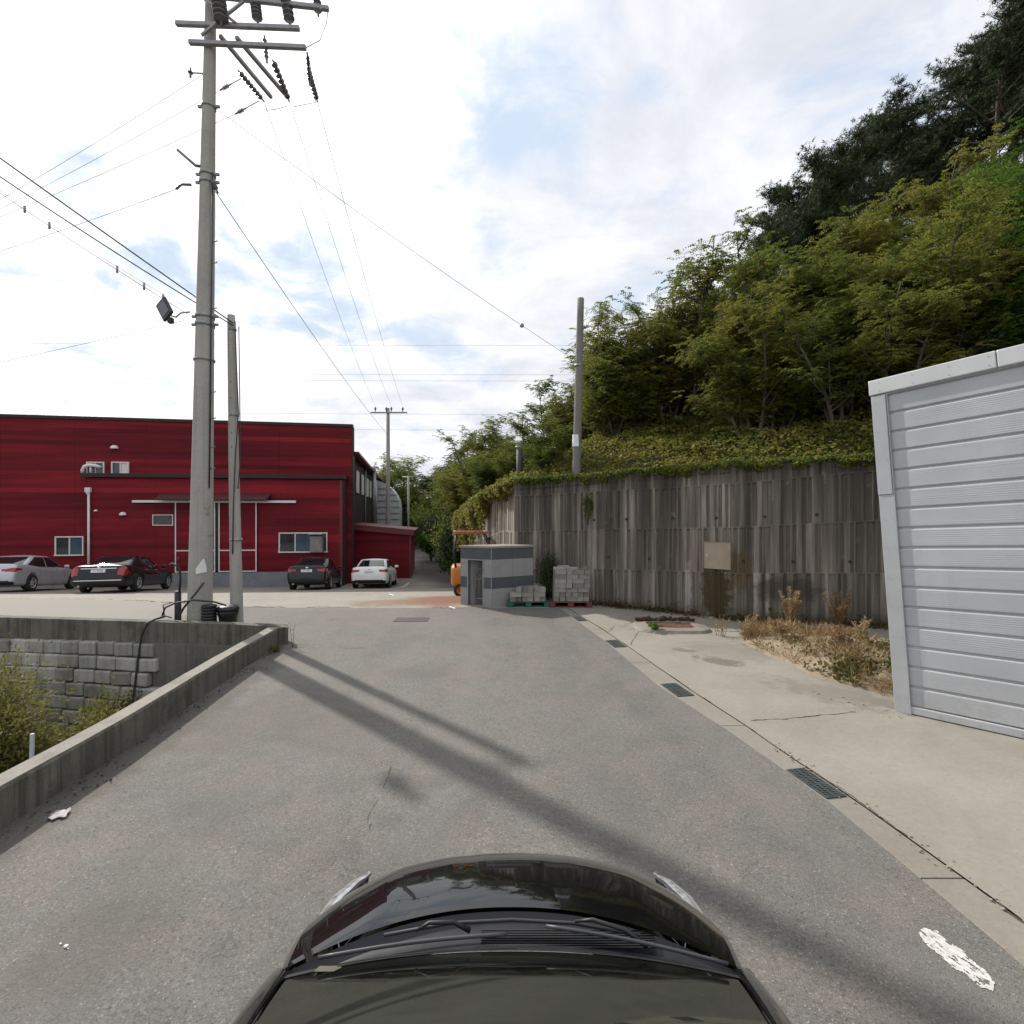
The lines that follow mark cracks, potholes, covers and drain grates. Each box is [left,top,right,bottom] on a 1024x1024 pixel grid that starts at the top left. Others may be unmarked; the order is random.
drain grate [661,683,694,697]
drain grate [786,768,846,799]
